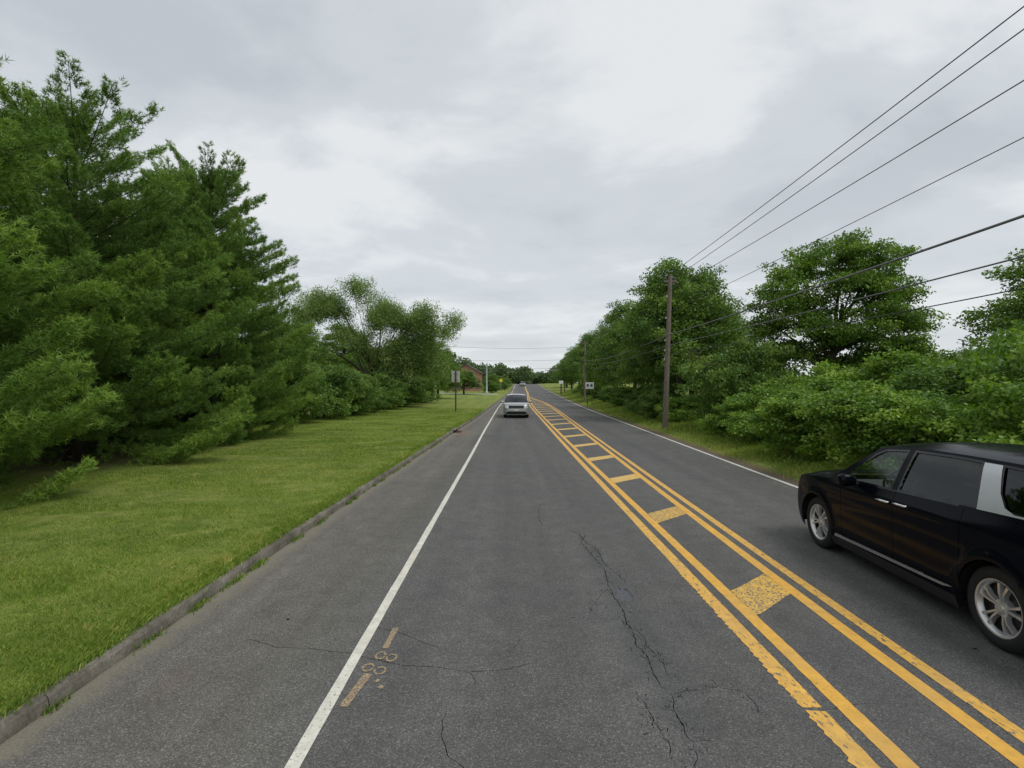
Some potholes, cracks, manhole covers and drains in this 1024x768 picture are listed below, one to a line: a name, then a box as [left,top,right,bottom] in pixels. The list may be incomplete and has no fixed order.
crack [426,712,464,768]
crack [241,628,538,685]
crack [570,530,767,768]
